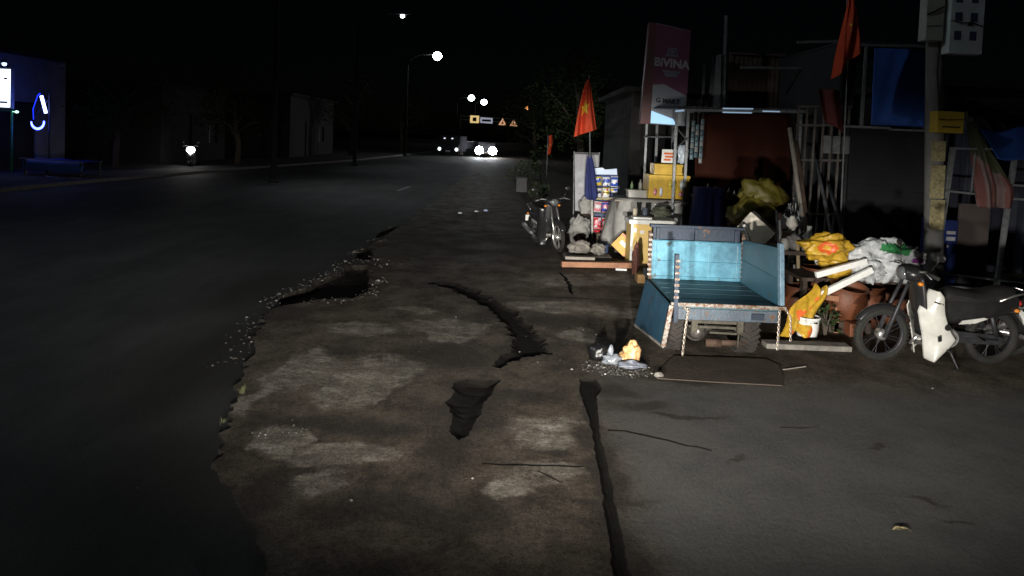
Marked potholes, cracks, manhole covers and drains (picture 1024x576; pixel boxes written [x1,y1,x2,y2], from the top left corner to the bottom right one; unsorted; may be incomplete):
pothole [277,265,374,306]
crack [482,462,585,483]
pothole [445,379,501,440]
crack [428,273,640,368]
pothole [355,246,373,260]
crack [608,429,712,451]
